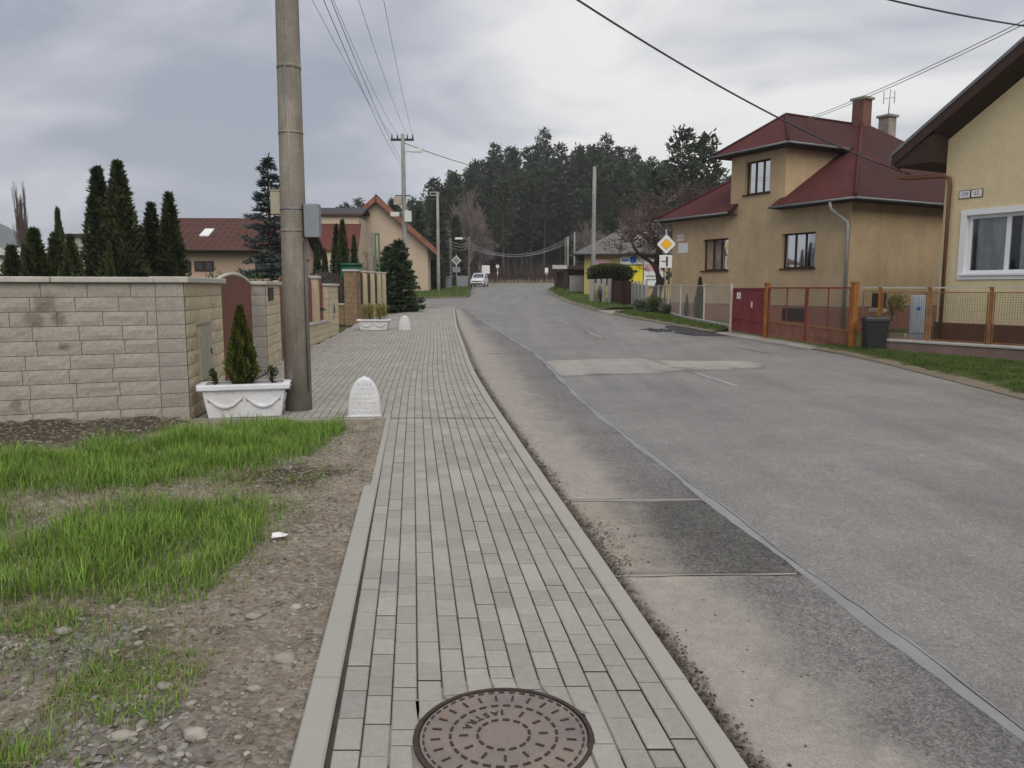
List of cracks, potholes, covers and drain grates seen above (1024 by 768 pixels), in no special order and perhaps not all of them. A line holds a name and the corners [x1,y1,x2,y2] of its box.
manhole cover [385,677,621,768]
